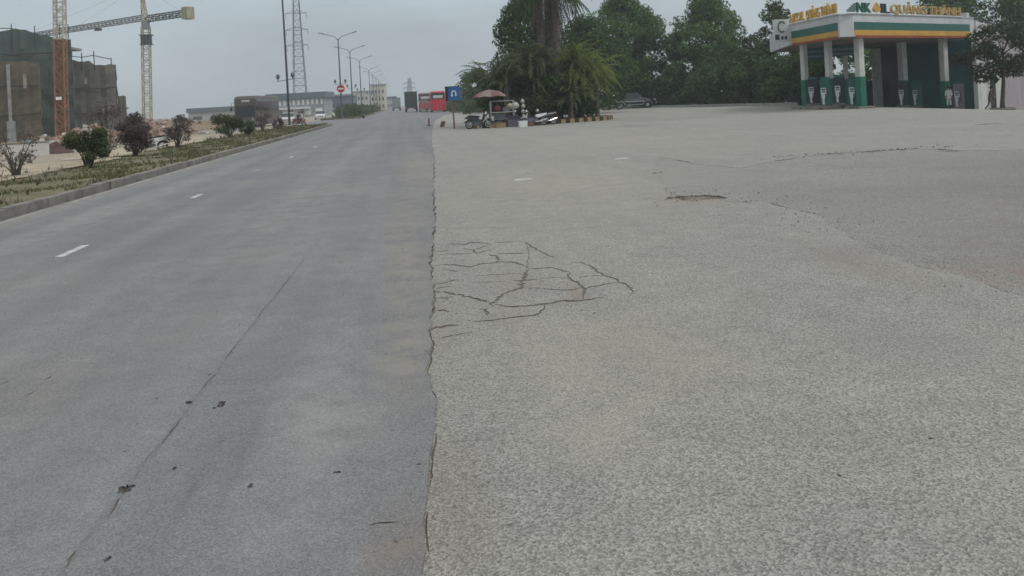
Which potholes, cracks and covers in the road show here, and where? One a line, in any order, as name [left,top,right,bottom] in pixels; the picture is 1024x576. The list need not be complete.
crack [67,280,288,568]
crack [429,228,634,339]
